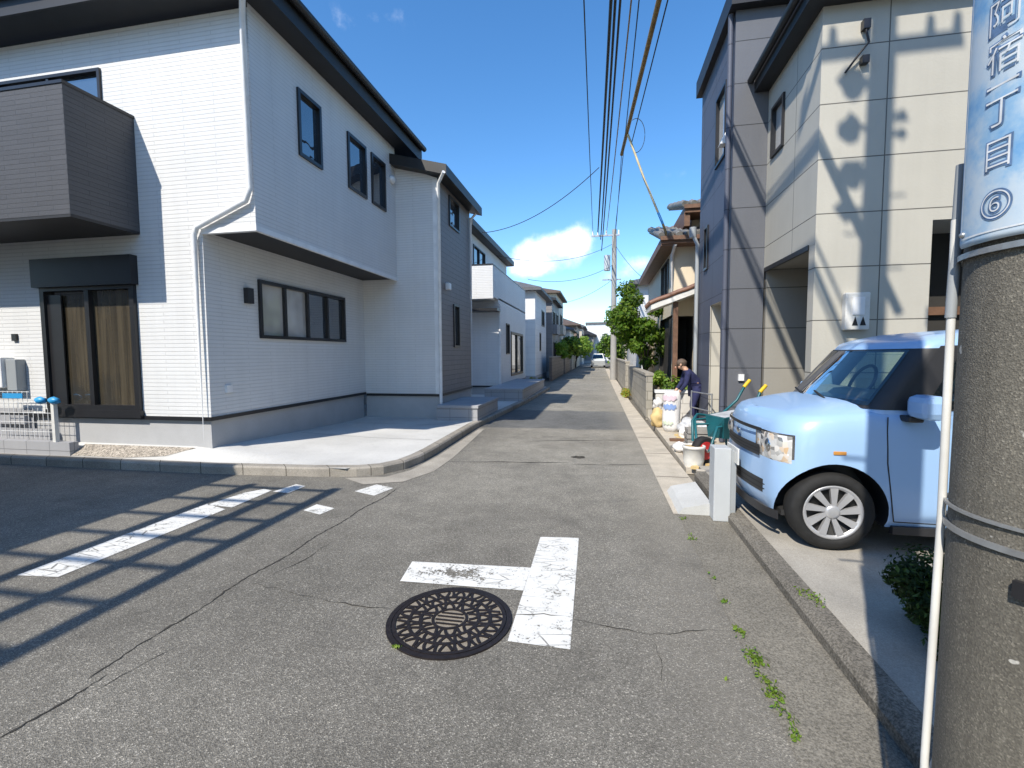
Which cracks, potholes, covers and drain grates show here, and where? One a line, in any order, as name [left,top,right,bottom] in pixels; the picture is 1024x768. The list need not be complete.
manhole cover [385,587,512,661]
crack [1,489,723,737]
